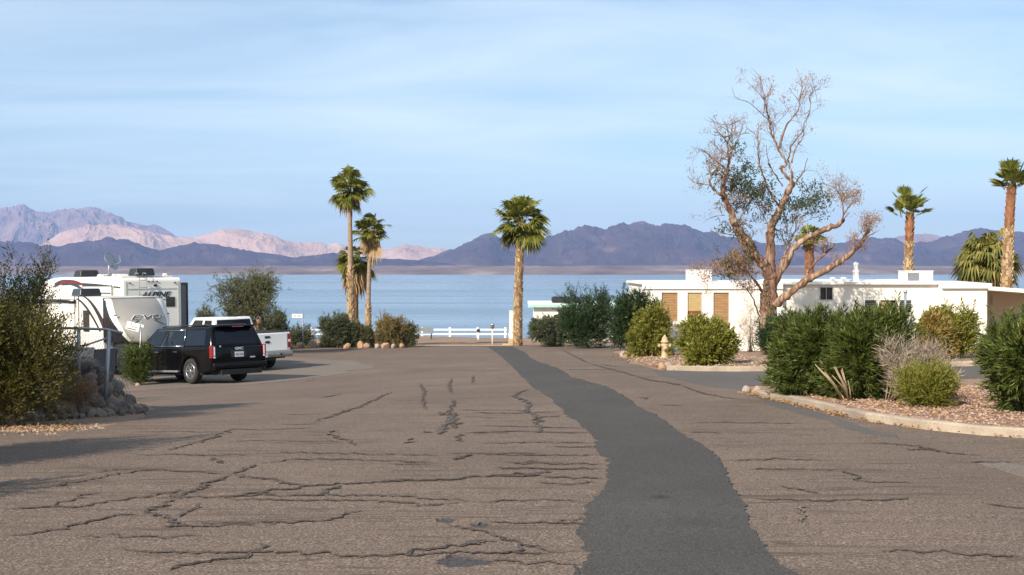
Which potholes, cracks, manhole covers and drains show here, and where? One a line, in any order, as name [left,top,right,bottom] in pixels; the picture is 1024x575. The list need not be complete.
crack [0,370,603,571]
crack [881,548,1020,557]
crack [873,442,1008,463]
crack [738,457,917,522]
